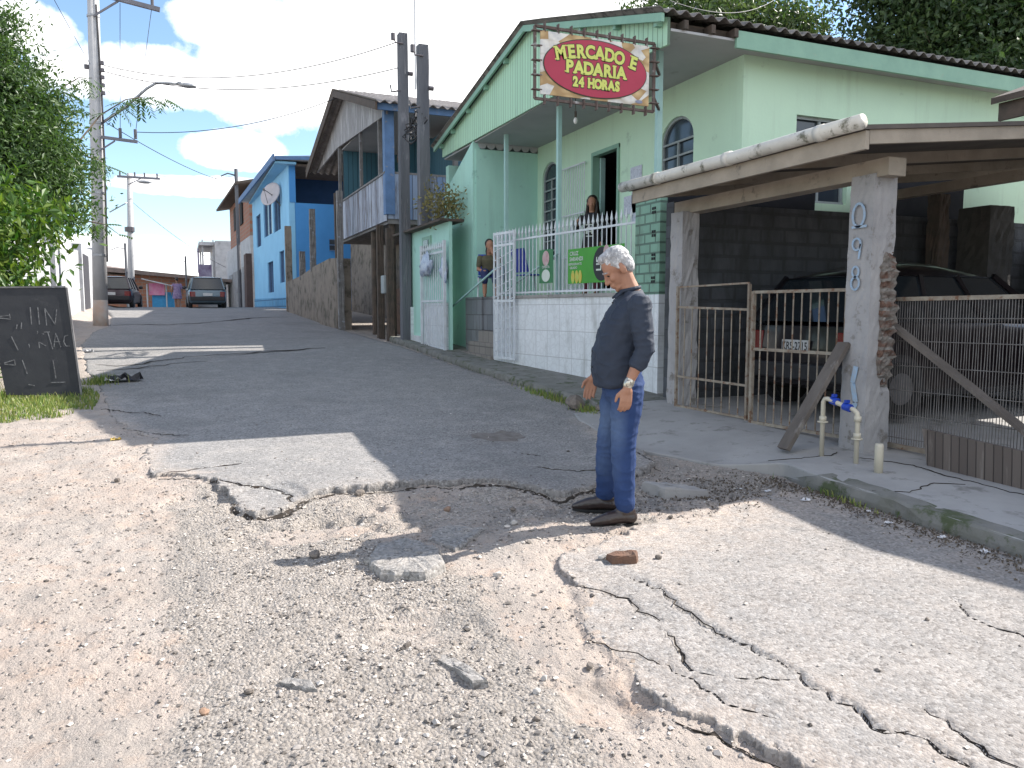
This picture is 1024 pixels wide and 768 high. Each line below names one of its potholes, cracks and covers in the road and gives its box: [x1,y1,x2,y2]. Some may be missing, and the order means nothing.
crack [101,409,174,435]
pothole [357,495,541,531]
pothole [160,501,214,512]
crack [150,452,637,520]
crack [583,579,1020,768]
pothole [555,680,641,733]
pothole [360,604,475,652]
pothole [255,526,370,546]
